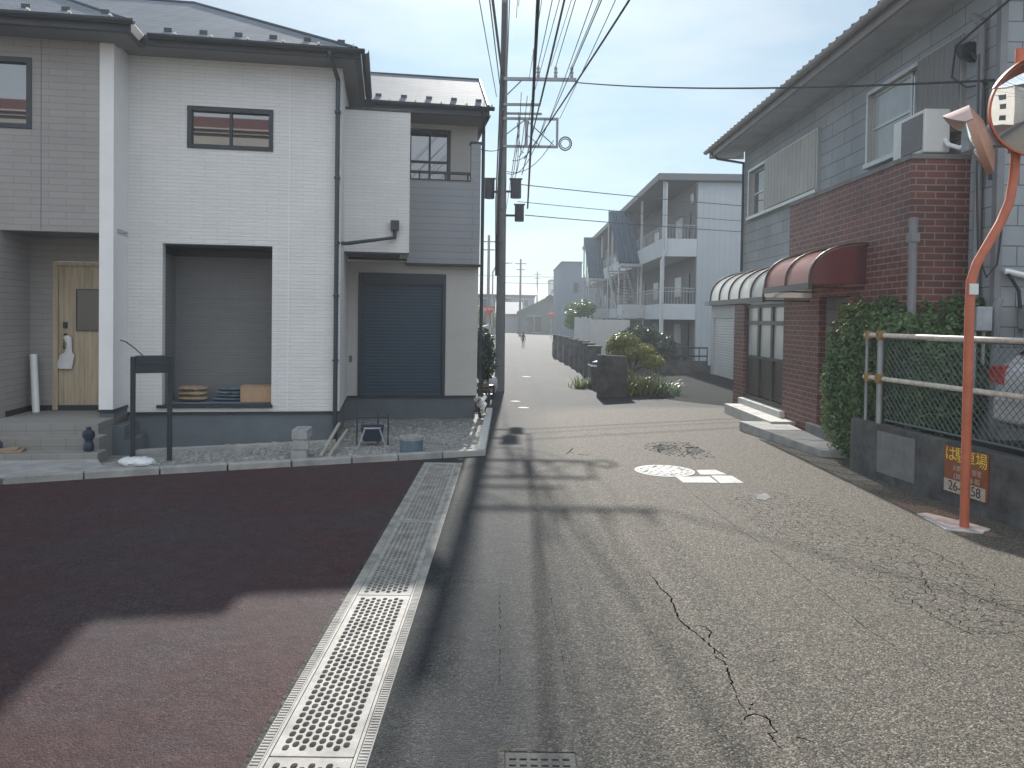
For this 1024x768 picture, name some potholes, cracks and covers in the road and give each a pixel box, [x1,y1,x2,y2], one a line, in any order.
crack [726,492,1024,647]
pothole [686,447,705,455]
crack [648,571,814,749]
manhole cover [634,465,695,477]
pothole [652,444,680,454]
